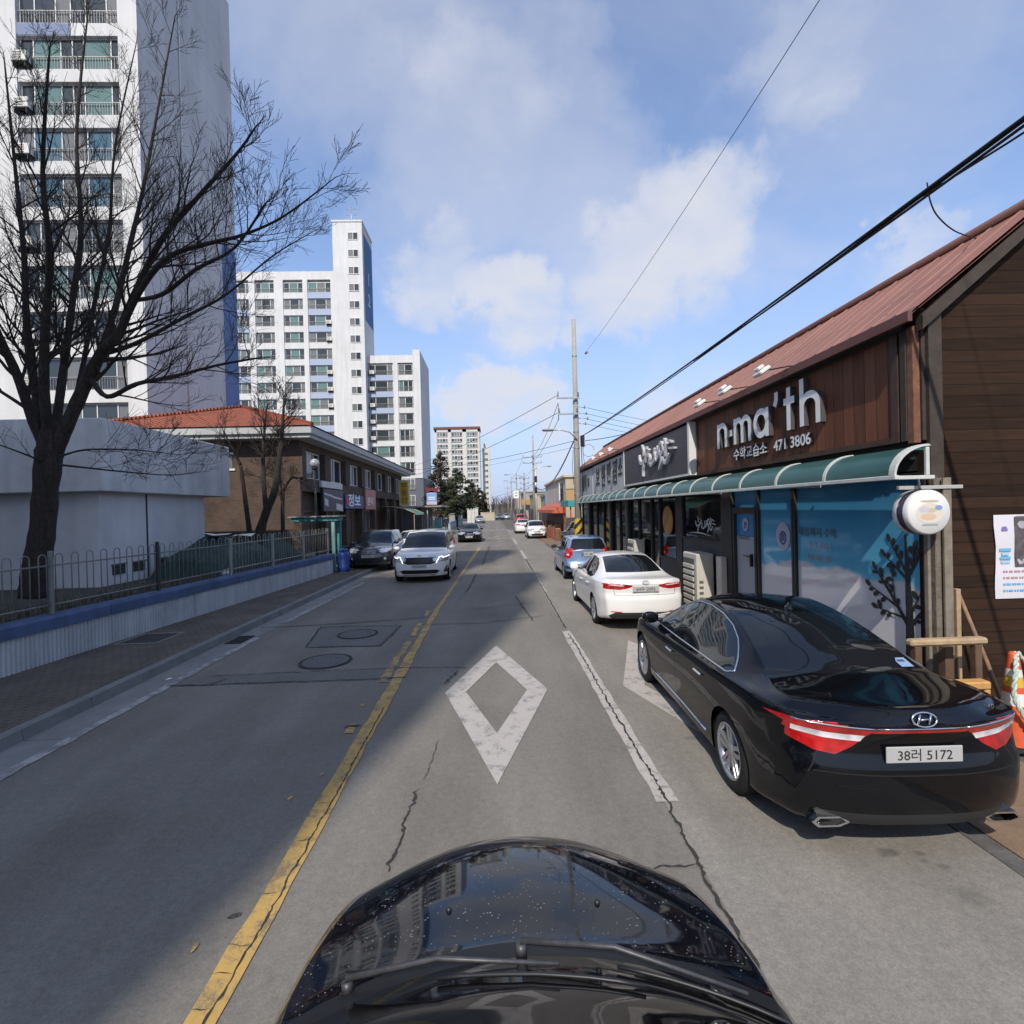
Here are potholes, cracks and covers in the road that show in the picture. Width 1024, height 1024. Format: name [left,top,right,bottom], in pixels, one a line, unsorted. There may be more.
manhole cover [337,629,378,639]
drain grate [224,635,255,644]
manhole cover [298,654,353,669]
crack [385,743,437,872]
